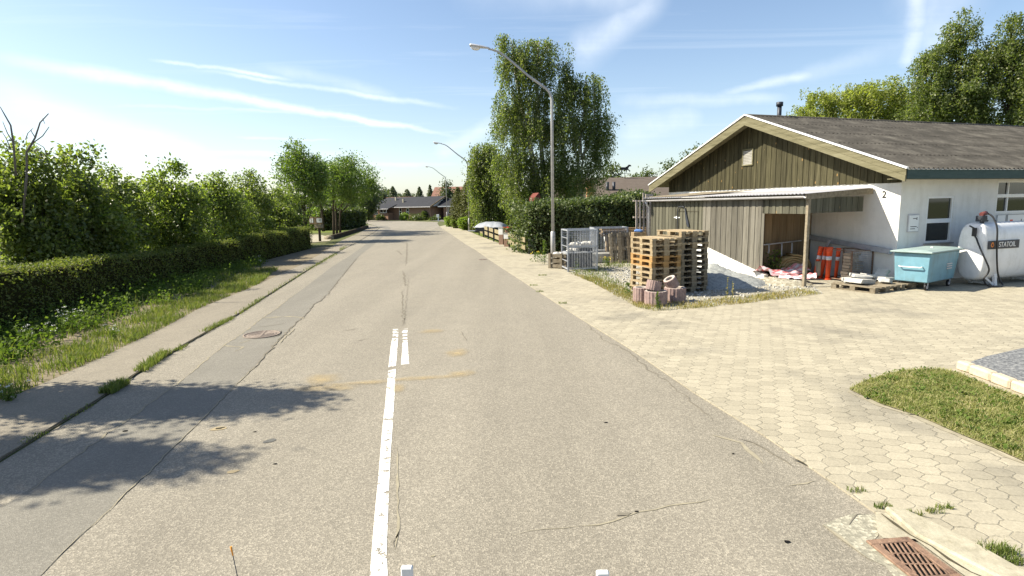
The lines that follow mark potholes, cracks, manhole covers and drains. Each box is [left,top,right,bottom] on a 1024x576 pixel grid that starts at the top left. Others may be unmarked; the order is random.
manhole cover [243,330,281,339]
crack [398,244,410,326]
crack [590,326,713,420]
drain grate [866,537,961,576]
crack [714,435,813,486]
crack [392,450,400,548]
crack [518,499,710,534]
